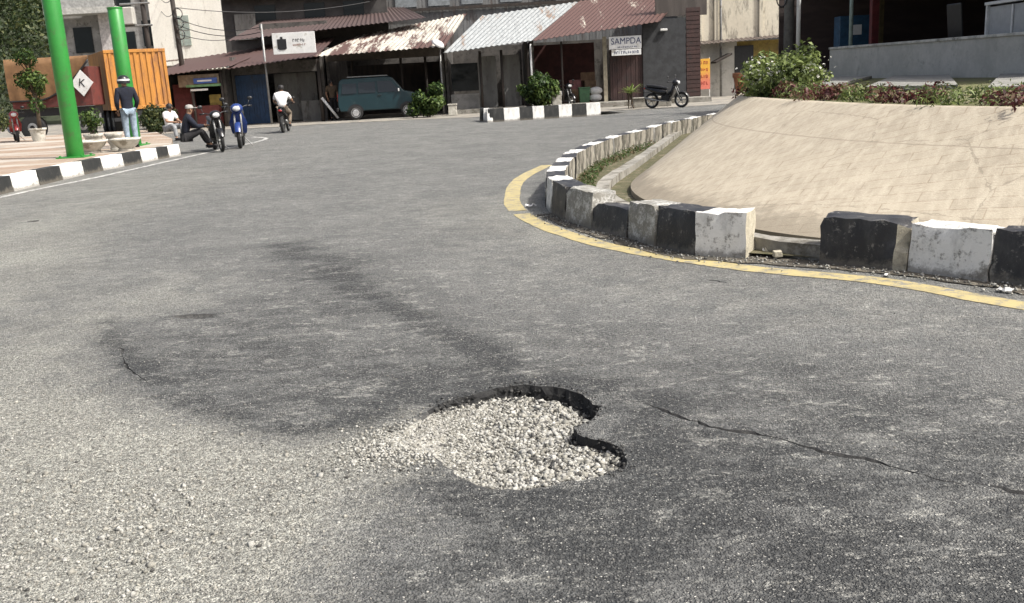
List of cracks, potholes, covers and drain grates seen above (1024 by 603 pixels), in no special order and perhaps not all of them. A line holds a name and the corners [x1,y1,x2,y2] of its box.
pothole [287,380,636,491]
crack [644,403,1024,495]
crack [120,347,147,382]
